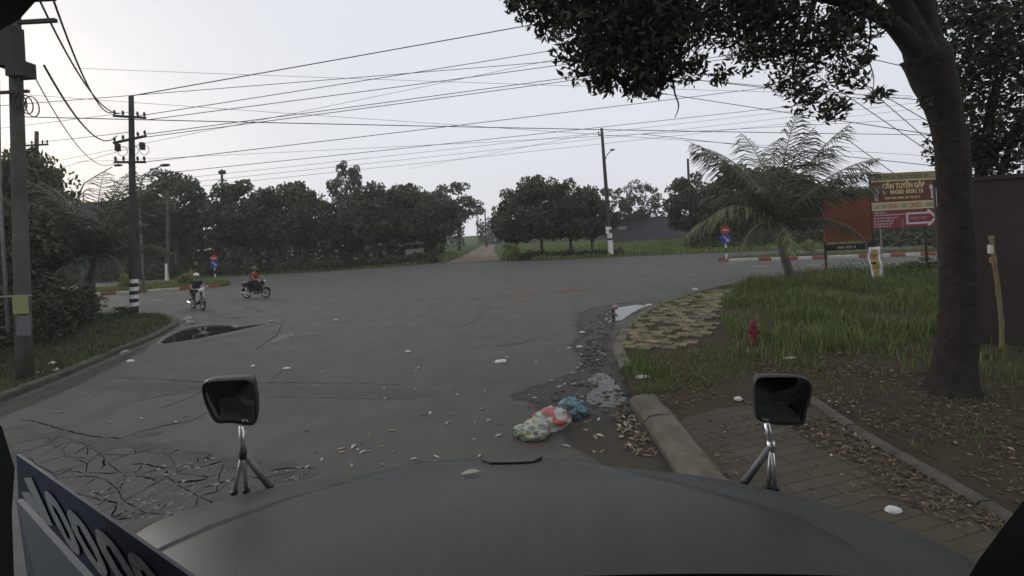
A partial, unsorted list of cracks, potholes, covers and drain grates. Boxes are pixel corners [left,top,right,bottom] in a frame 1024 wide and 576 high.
crack [217,306,317,350]
pothole [584,371,629,409]
pothole [157,323,270,345]
crack [6,371,399,522]
pothole [604,303,653,324]
